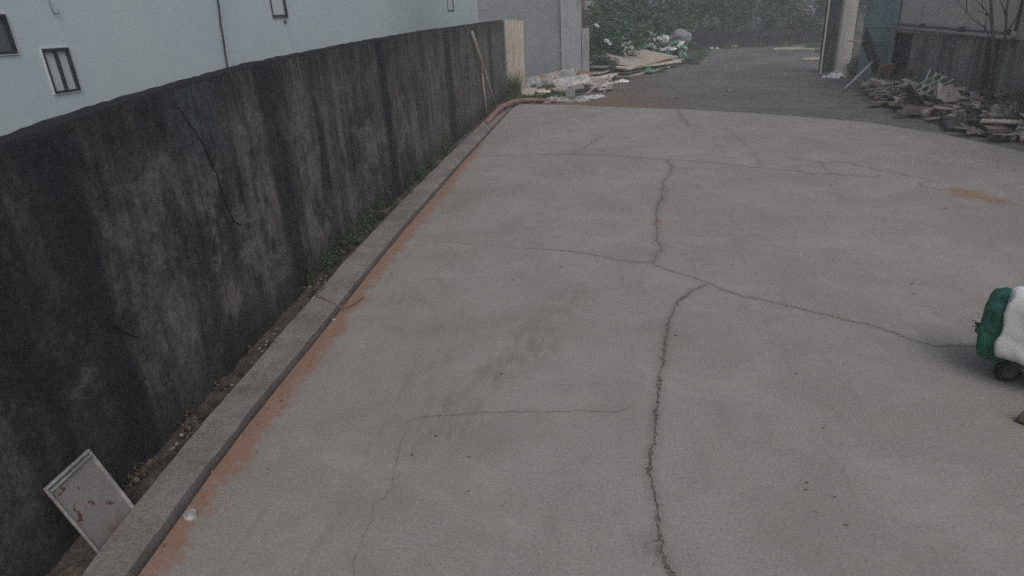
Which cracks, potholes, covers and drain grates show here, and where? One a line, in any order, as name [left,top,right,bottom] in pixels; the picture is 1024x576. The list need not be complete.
crack [419,130,975,576]
